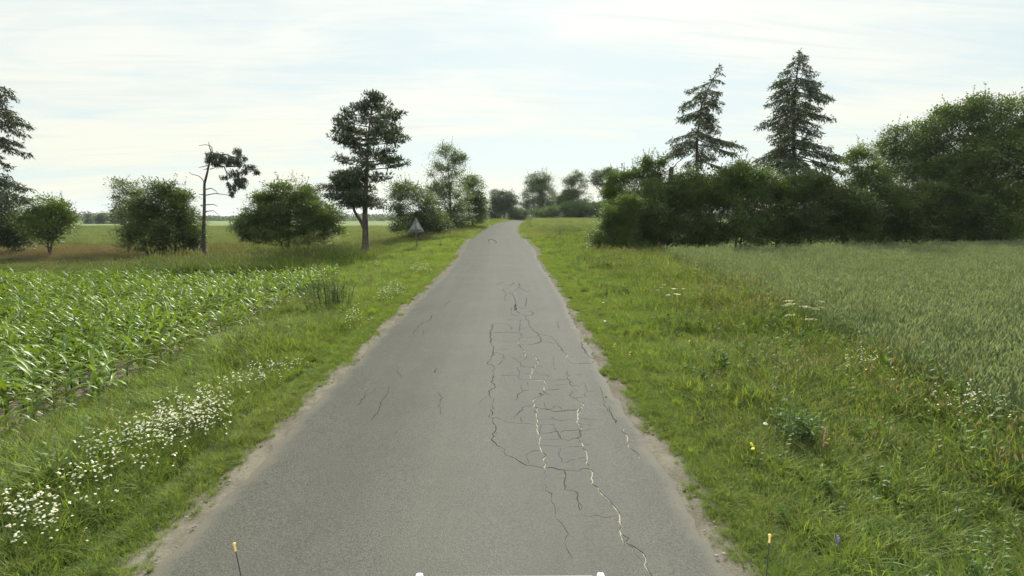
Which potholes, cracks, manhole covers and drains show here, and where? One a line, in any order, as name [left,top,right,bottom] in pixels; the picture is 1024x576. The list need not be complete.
crack [481,282,652,576]
